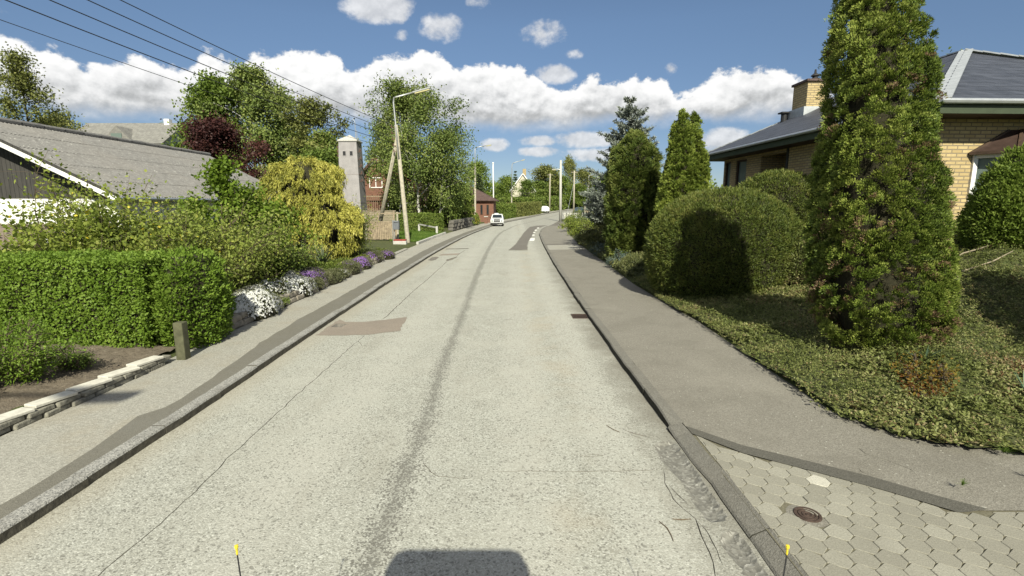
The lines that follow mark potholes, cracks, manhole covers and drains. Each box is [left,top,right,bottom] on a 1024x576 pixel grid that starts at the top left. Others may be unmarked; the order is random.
manhole cover [793,506,822,523]
crack [664,473,723,576]
